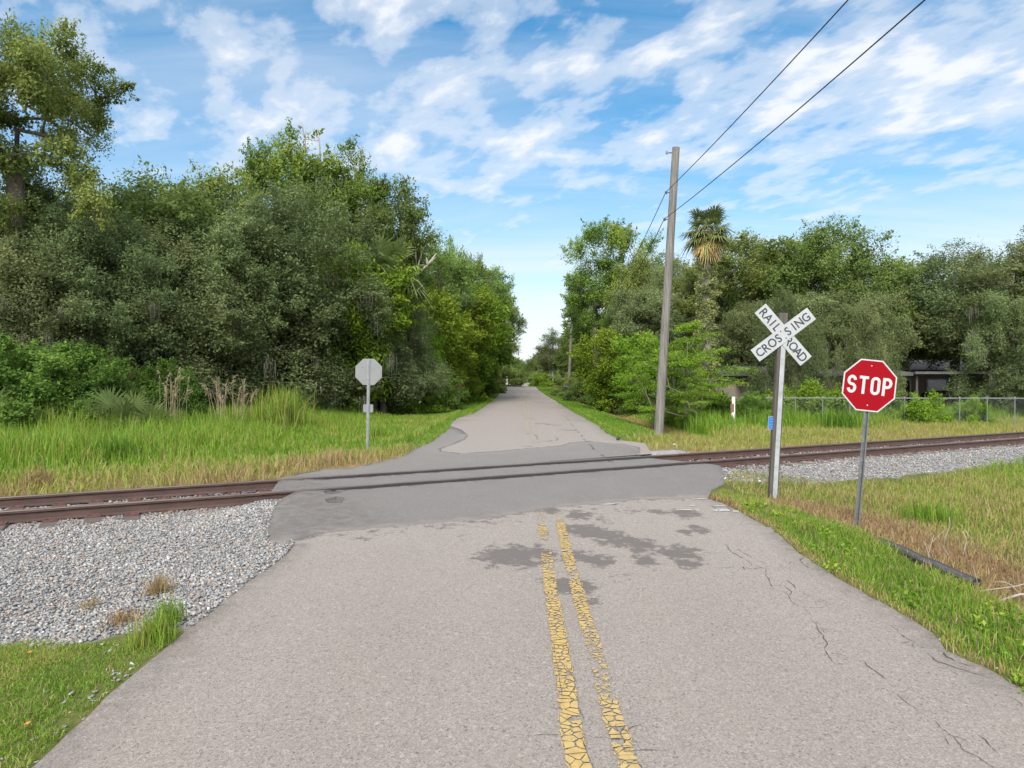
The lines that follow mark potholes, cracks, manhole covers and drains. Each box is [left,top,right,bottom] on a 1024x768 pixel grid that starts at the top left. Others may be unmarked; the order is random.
crack [865,662,996,768]
crack [894,627,990,678]
crack [524,417,611,462]
crack [720,545,823,610]
